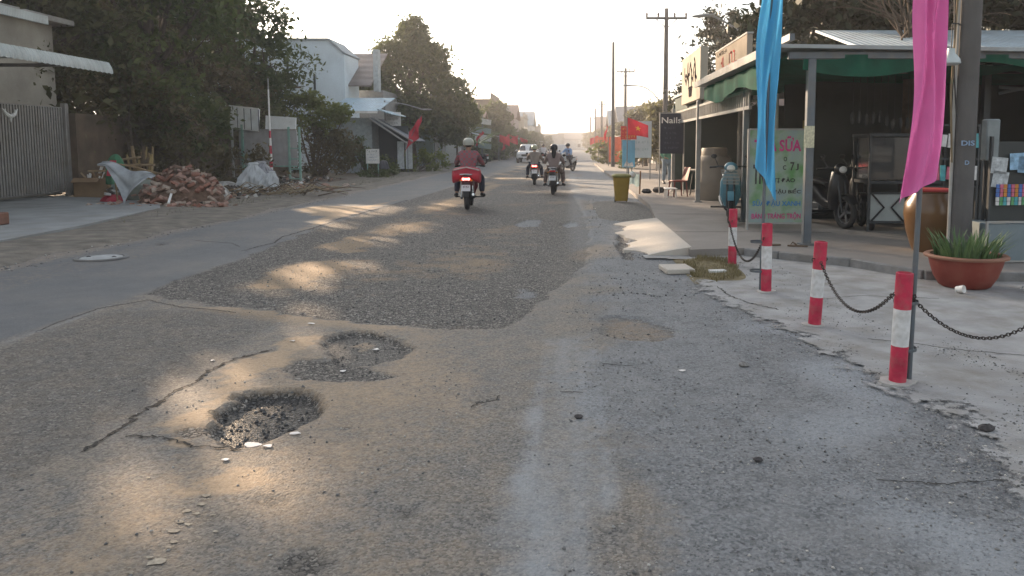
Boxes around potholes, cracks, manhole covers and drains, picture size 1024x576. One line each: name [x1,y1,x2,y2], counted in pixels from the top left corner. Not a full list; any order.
pothole [314,330,419,368]
pothole [275,357,408,384]
crack [81,349,272,452]
pothole [205,385,332,449]
manhole cover [73,253,129,262]
